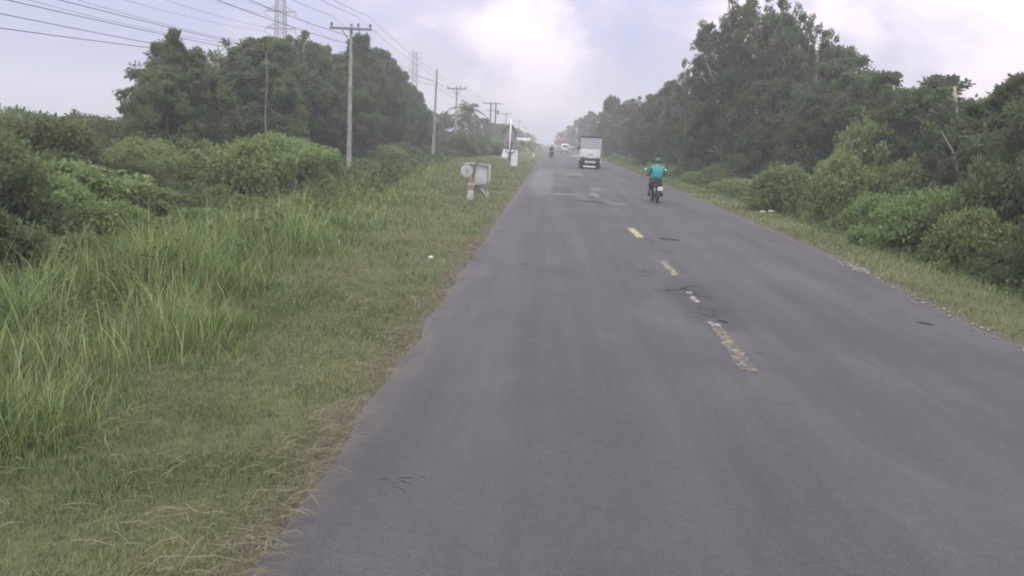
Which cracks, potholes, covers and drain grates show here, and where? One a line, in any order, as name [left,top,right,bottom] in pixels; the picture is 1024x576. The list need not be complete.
crack [640,270,716,317]
